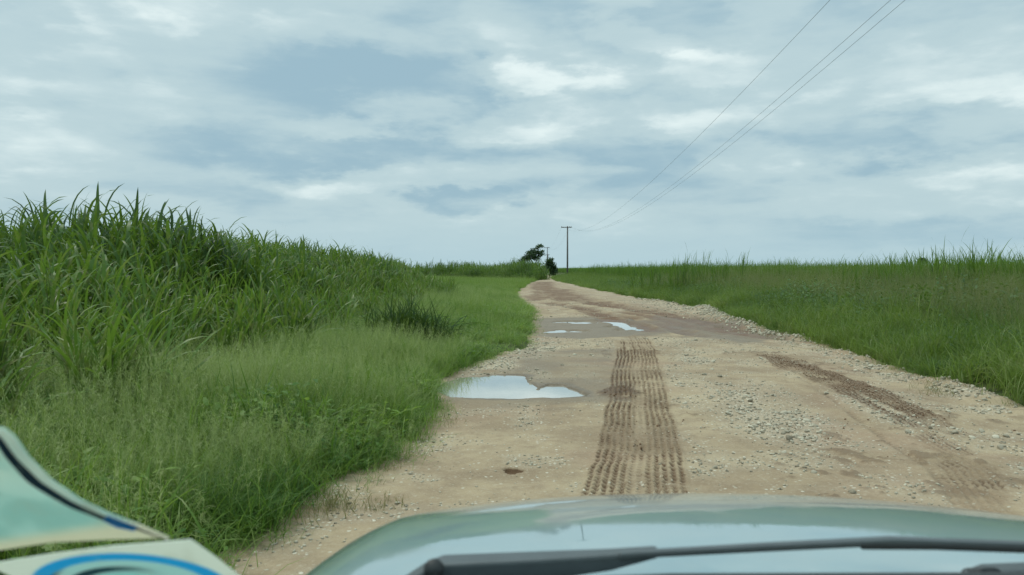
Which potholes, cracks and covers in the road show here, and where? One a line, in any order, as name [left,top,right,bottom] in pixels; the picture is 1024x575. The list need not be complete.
pothole [498,466,531,475]
pothole [534,316,660,339]
pothole [444,370,606,401]
